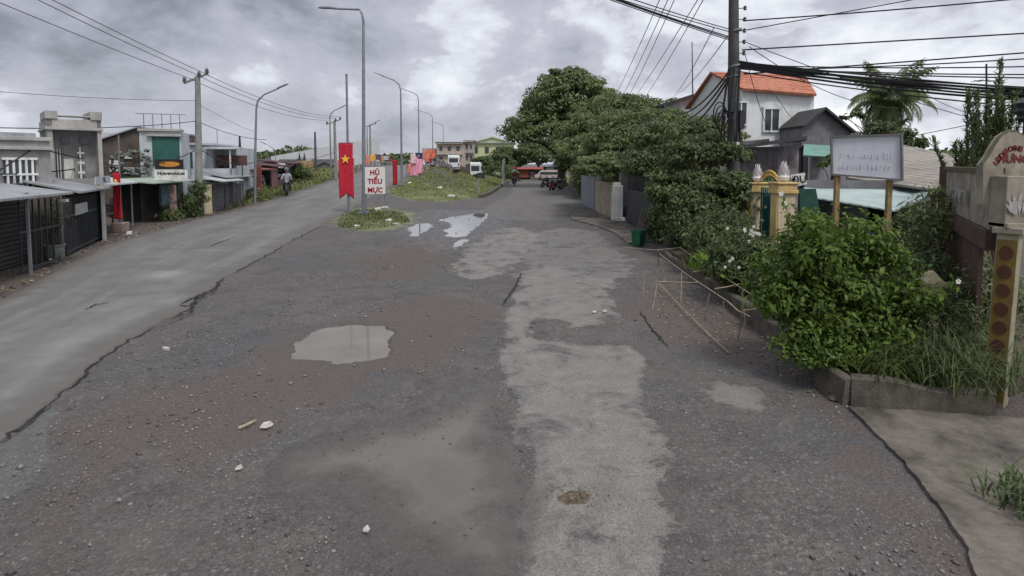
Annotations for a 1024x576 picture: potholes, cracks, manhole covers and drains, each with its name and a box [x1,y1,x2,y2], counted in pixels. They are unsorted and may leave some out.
crack [640,311,669,349]
crack [1,226,321,441]
pothole [551,484,595,507]
